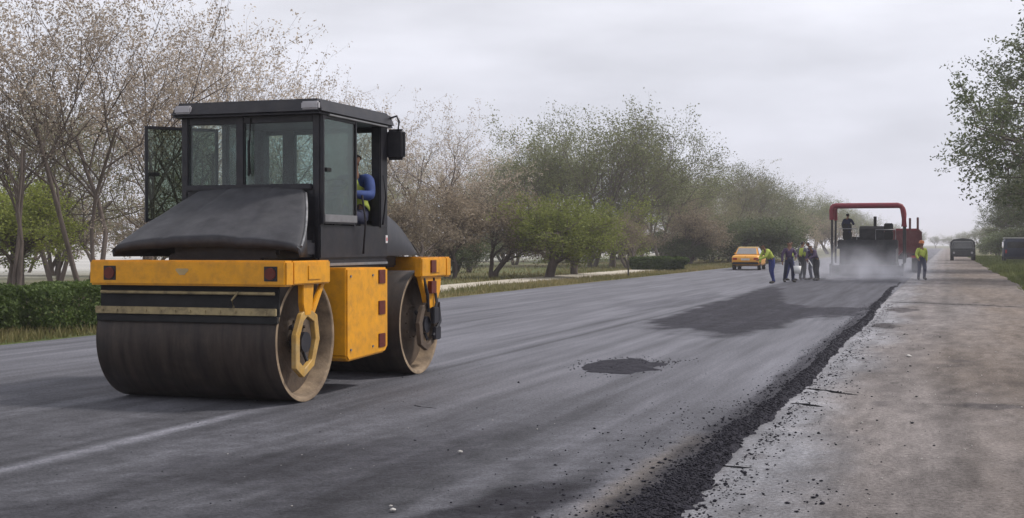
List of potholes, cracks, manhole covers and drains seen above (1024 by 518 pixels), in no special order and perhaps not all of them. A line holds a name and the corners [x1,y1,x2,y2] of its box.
crack [791,388,856,407]
